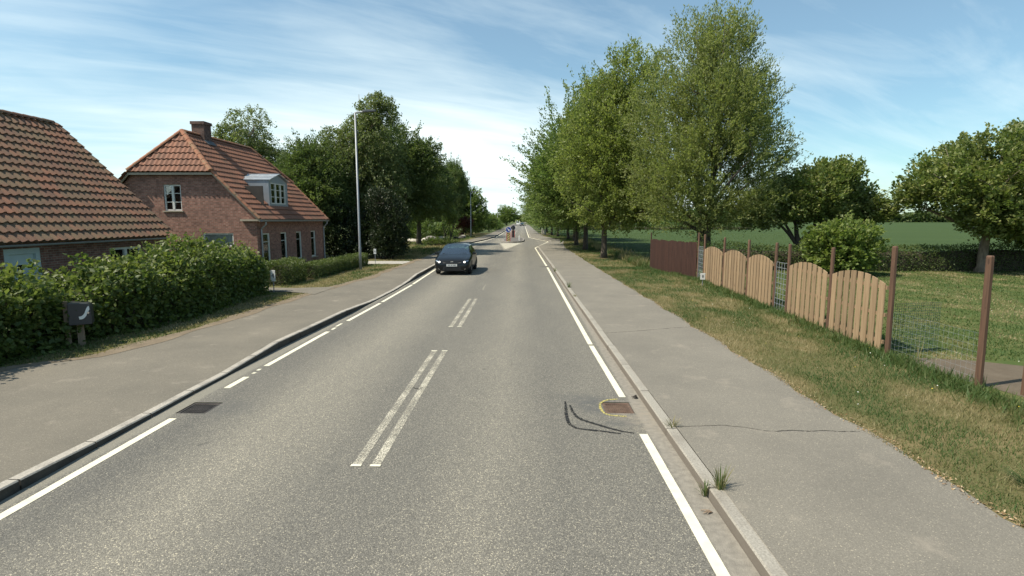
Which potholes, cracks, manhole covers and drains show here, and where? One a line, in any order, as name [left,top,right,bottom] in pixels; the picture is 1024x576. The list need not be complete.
drain grate [177,403,222,414]
